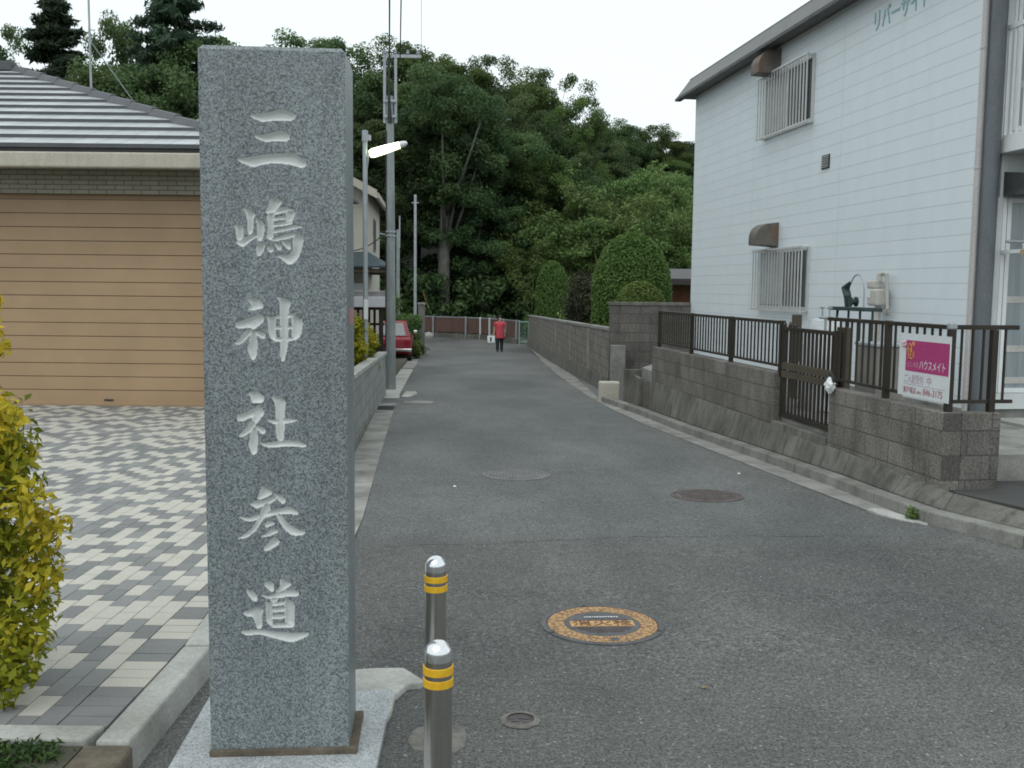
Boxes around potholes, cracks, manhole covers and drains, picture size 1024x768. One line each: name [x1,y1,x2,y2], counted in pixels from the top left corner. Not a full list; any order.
manhole cover [482,469,551,481]
manhole cover [541,605,664,646]
utility cover [500,711,541,729]
manhole cover [670,489,744,503]
